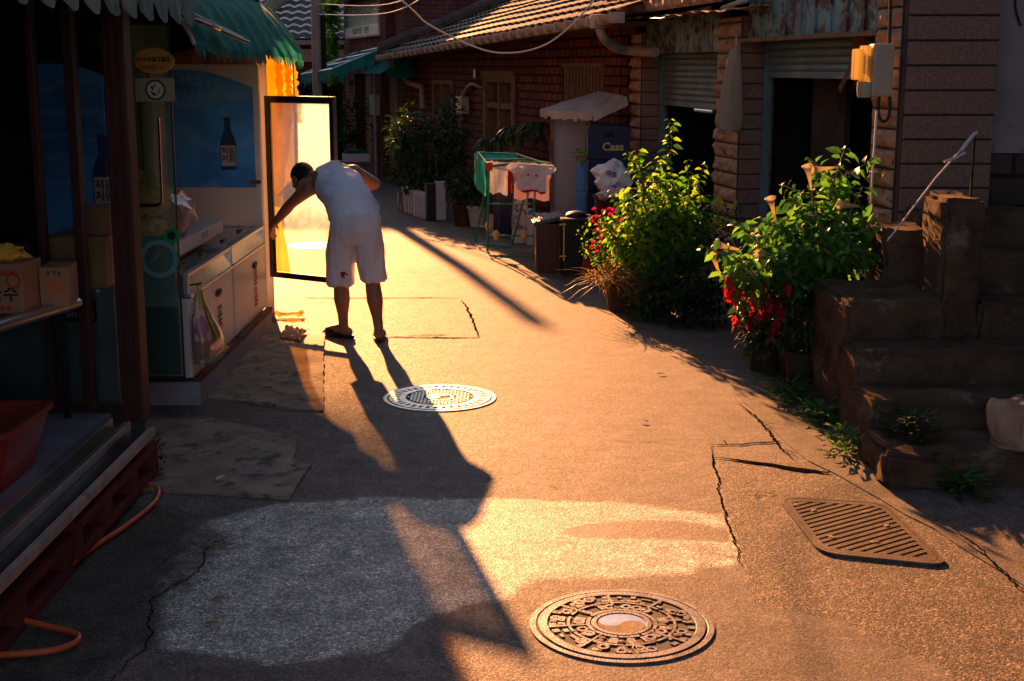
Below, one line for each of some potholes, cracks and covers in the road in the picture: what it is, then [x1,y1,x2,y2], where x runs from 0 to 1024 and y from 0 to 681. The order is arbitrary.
crack [942,523,1024,590]
drain grate [780,496,944,566]
manhole cover [383,384,496,412]
crack [707,440,830,473]
manhole cover [529,589,715,665]
crack [78,539,236,681]
crack [302,297,480,338]
